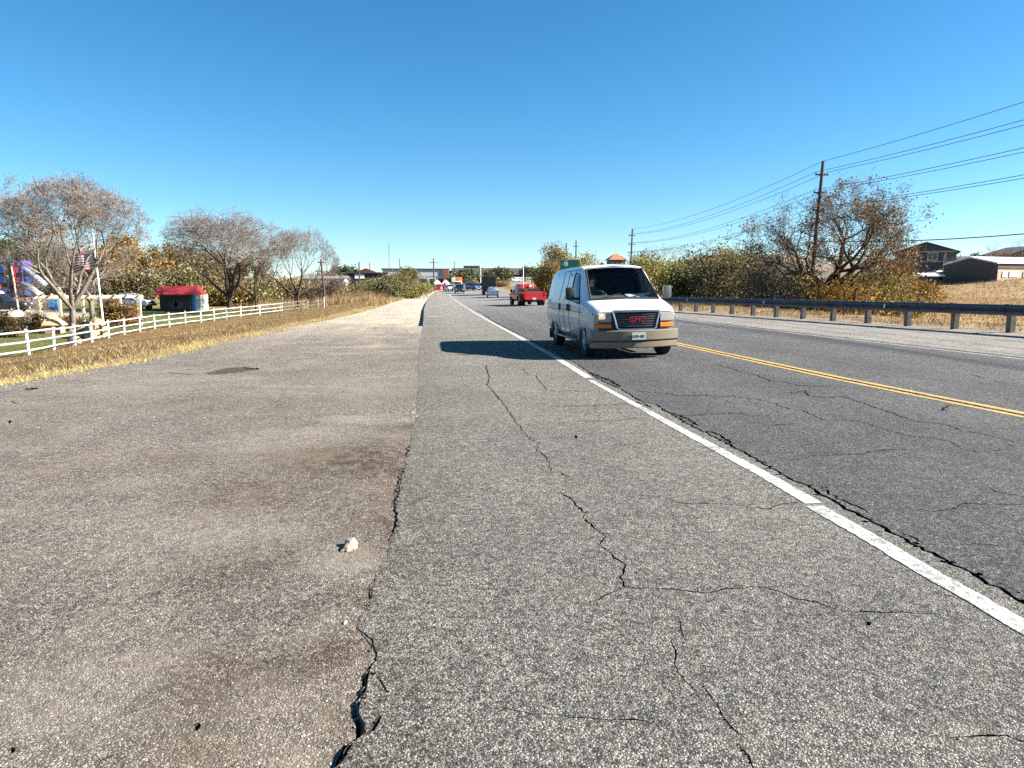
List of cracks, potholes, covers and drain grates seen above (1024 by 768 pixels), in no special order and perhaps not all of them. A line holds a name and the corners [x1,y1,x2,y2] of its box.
crack [639,365,1012,453]
crack [485,365,924,768]
crack [919,488,1012,512]
crack [335,580,388,767]
